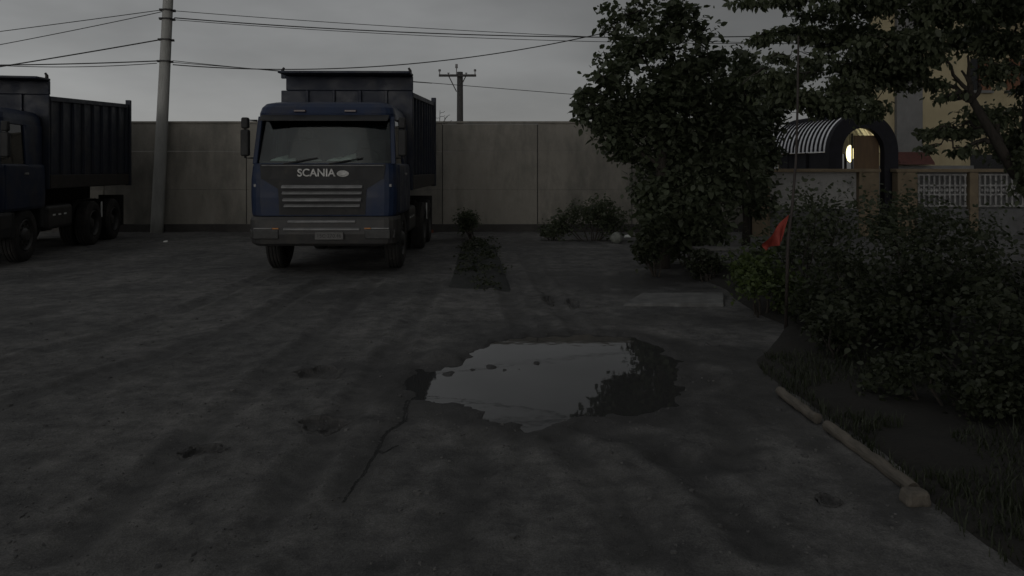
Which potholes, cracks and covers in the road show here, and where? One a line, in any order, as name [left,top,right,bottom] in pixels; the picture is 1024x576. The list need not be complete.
crack [342,400,411,502]
pothole [294,414,354,437]
pothole [174,443,229,460]
pothole [292,365,345,380]
pothole [814,492,844,508]
